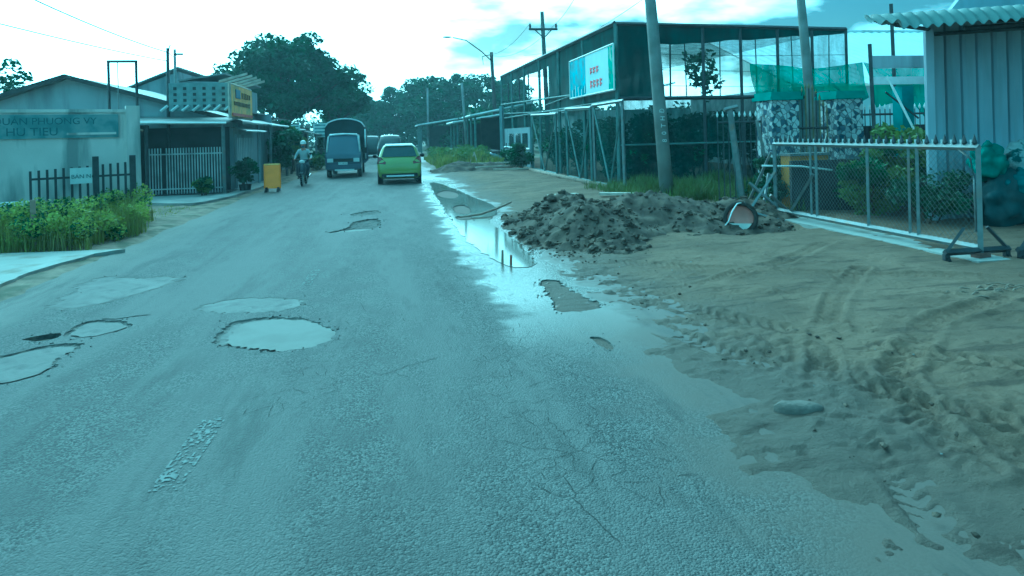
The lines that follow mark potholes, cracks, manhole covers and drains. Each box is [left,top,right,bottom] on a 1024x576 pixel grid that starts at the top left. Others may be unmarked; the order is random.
pothole [49,317,133,339]
pothole [211,314,347,353]
pothole [534,279,606,314]
pothole [325,218,381,233]
crack [411,253,703,542]
pothole [0,339,92,385]
pothole [22,333,62,344]
